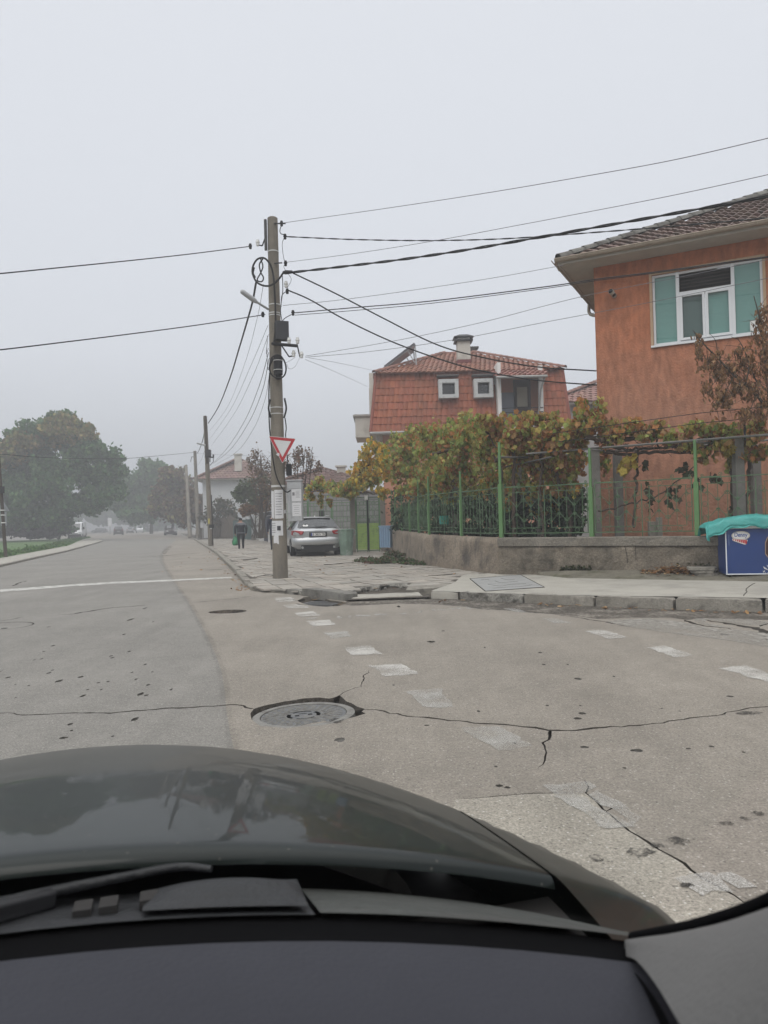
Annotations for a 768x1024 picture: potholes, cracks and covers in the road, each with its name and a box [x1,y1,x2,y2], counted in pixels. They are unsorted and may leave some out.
manhole cover [252,702,355,728]
utility cover [470,574,544,591]
crack [684,620,768,640]
crack [334,670,768,768]
crack [13,704,254,715]
crack [460,778,743,902]
